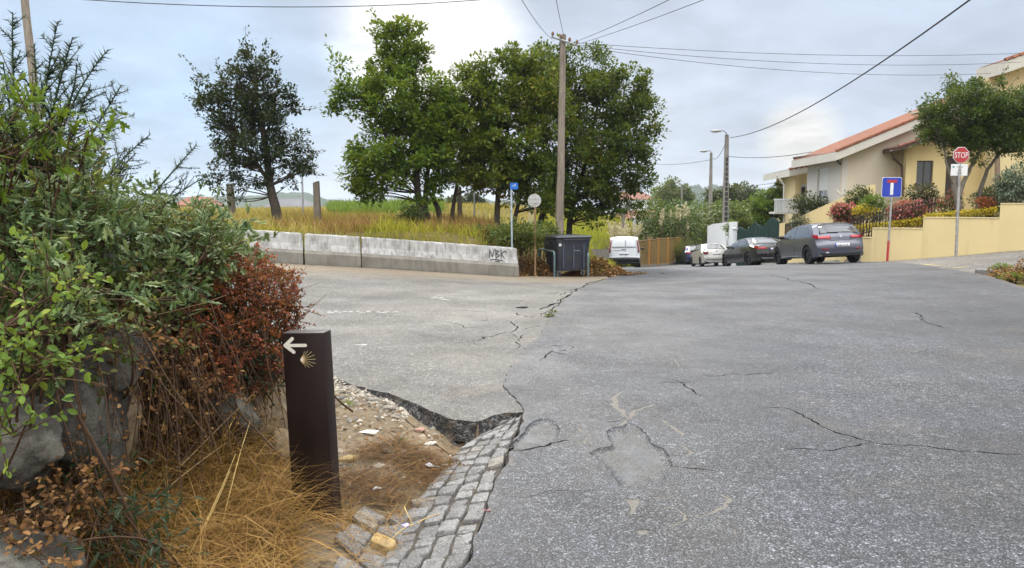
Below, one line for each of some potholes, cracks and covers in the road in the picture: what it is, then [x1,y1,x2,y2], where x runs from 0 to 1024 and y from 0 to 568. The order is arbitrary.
pothole [590,423,672,488]
pothole [509,418,560,449]
crack [758,406,1019,455]
crack [610,357,769,471]
crack [434,285,586,370]
